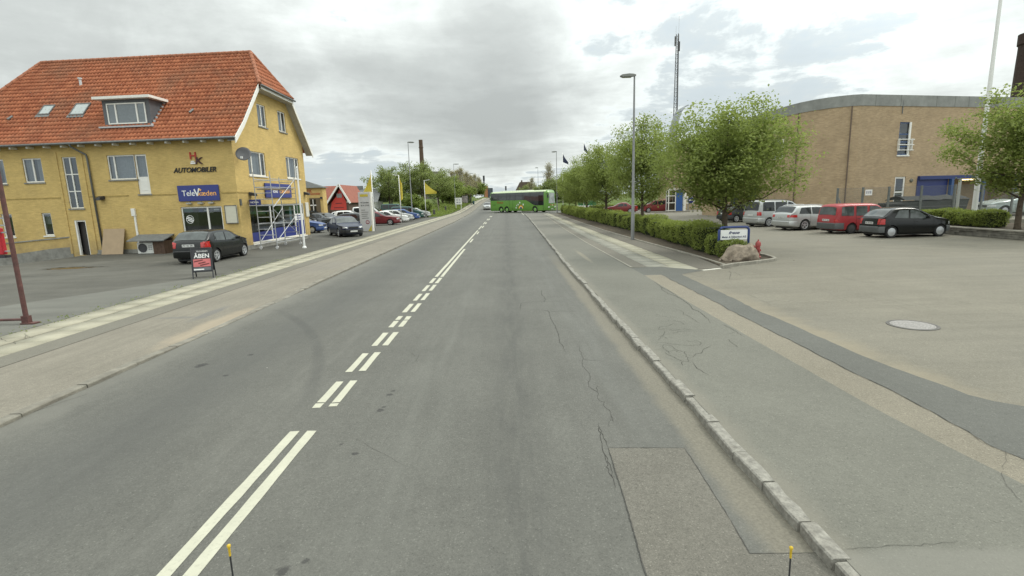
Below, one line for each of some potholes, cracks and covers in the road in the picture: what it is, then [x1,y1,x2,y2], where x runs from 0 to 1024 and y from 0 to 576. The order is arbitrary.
manhole cover [886,320,941,331]
crack [659,285,745,372]
crack [520,292,615,484]
